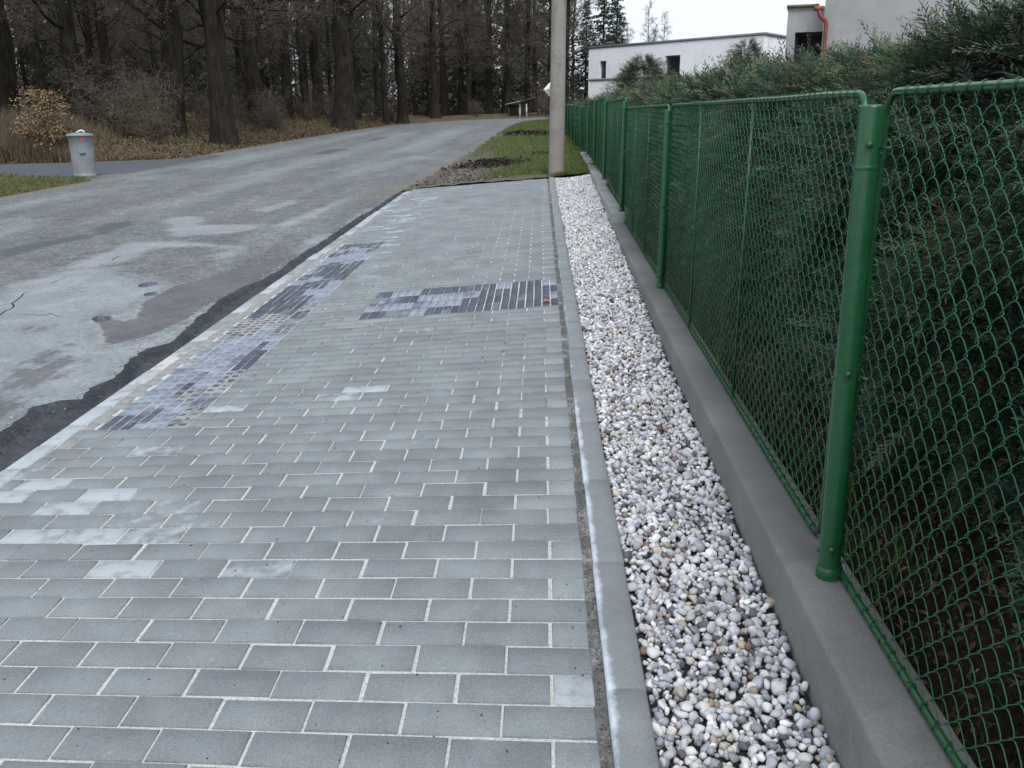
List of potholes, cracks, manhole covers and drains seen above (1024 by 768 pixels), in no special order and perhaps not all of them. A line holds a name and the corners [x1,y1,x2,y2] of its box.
crack [0,290,61,317]
